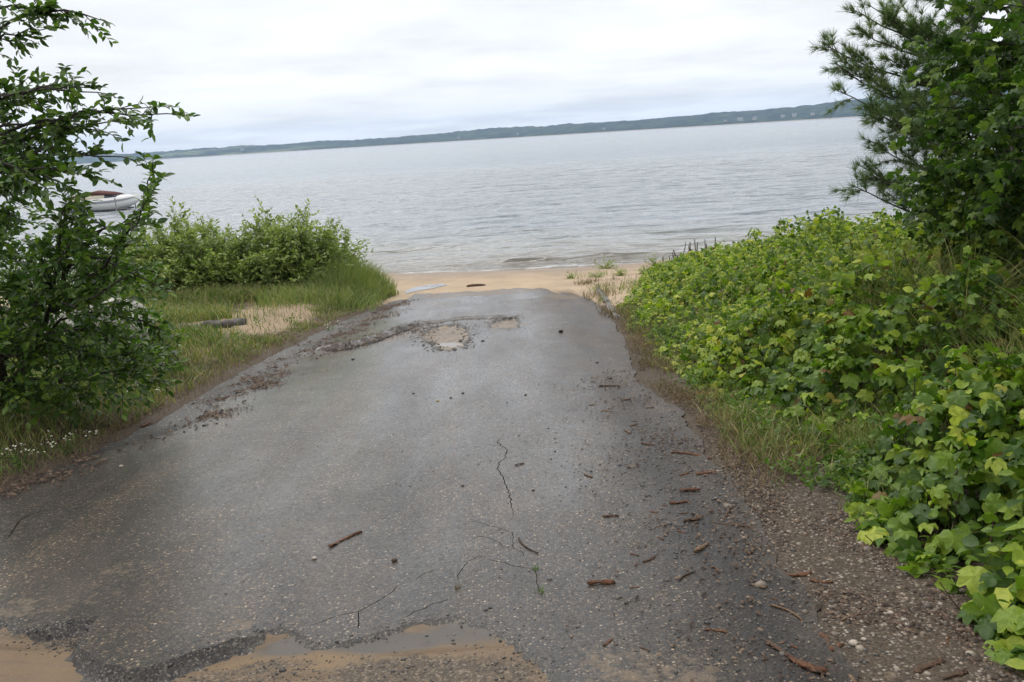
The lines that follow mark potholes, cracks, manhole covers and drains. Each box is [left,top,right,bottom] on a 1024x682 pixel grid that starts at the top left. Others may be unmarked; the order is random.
crack [6,506,71,540]
pothole [418,323,472,351]
pothole [487,317,521,329]
crack [457,434,539,590]
crack [311,588,451,629]
